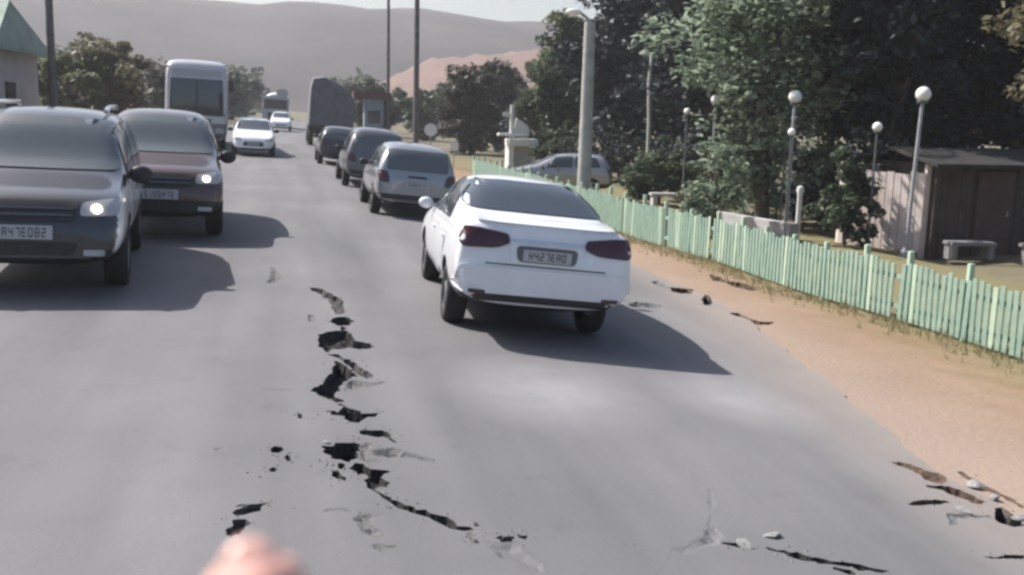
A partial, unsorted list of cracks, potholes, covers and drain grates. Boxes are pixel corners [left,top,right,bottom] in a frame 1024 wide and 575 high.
crack [629,274,756,308]
crack [309,287,347,331]
crack [232,503,270,522]
crack [735,315,773,325]
crack [707,489,718,511]
pothole [322,443,360,477]
crack [892,461,1024,526]
crack [323,429,476,544]
pothole [318,330,374,360]
pothole [311,361,358,403]
crack [328,354,386,406]
crack [766,547,887,575]
